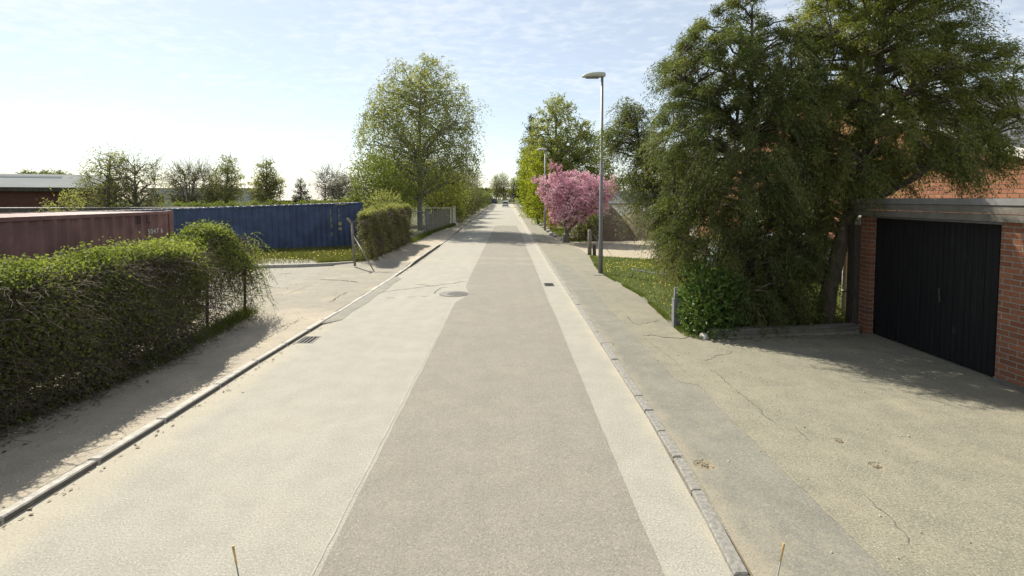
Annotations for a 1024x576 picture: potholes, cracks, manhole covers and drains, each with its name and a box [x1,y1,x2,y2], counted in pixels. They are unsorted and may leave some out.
crack [705,352,810,441]
crack [862,493,912,547]
drain grate [295,336,322,344]
